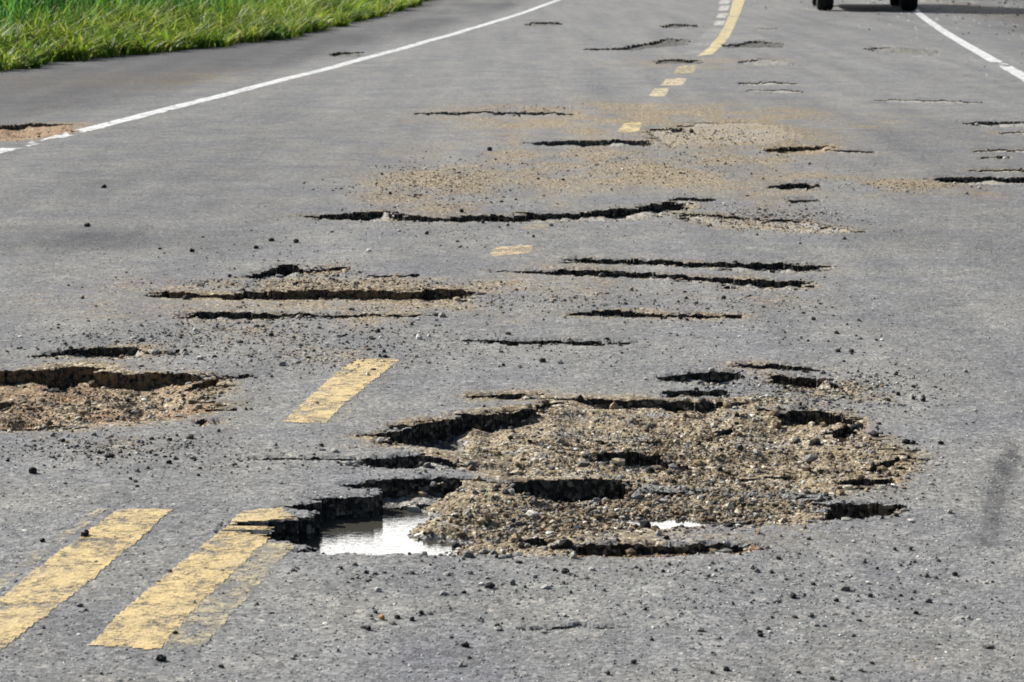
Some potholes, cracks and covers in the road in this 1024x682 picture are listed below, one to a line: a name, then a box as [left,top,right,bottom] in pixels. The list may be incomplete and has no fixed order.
pothole [0,366,235,432]
pothole [0,123,76,141]
pothole [242,264,420,280]
pothole [661,389,730,398]
pothole [139,288,481,304]
crack [738,81,804,93]
